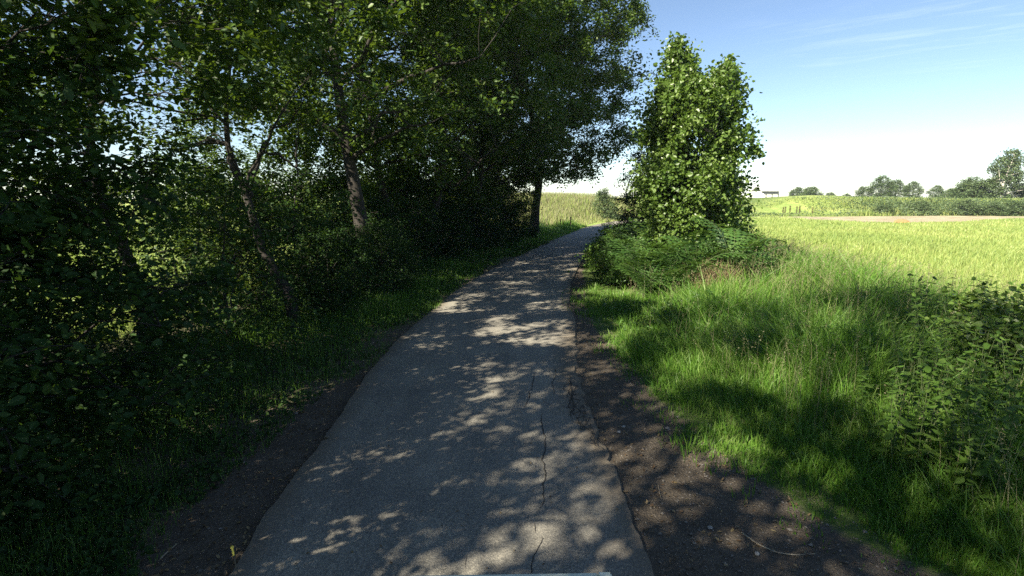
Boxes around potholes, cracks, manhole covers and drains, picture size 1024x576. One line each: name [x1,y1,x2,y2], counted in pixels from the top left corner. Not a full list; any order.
crack [526,373,547,572]
crack [552,369,604,452]
